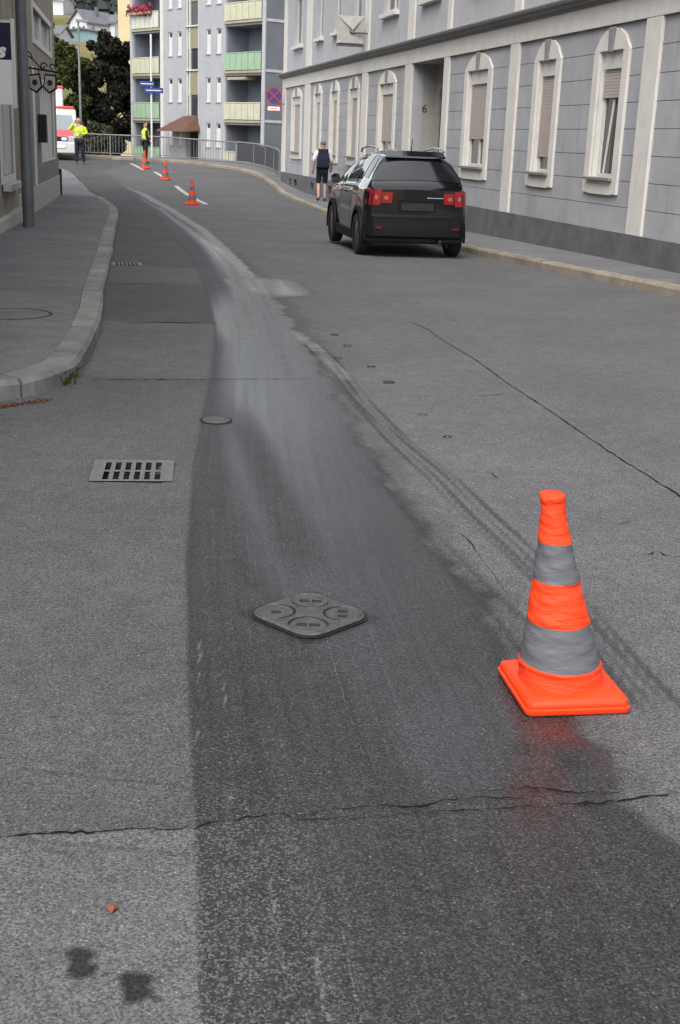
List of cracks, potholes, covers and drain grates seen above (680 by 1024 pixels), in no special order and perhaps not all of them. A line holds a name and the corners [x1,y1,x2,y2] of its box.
manhole cover [199,416,233,424]
drain grate [89,460,174,483]
manhole cover [251,593,368,638]
manhole cover [0,308,53,320]
